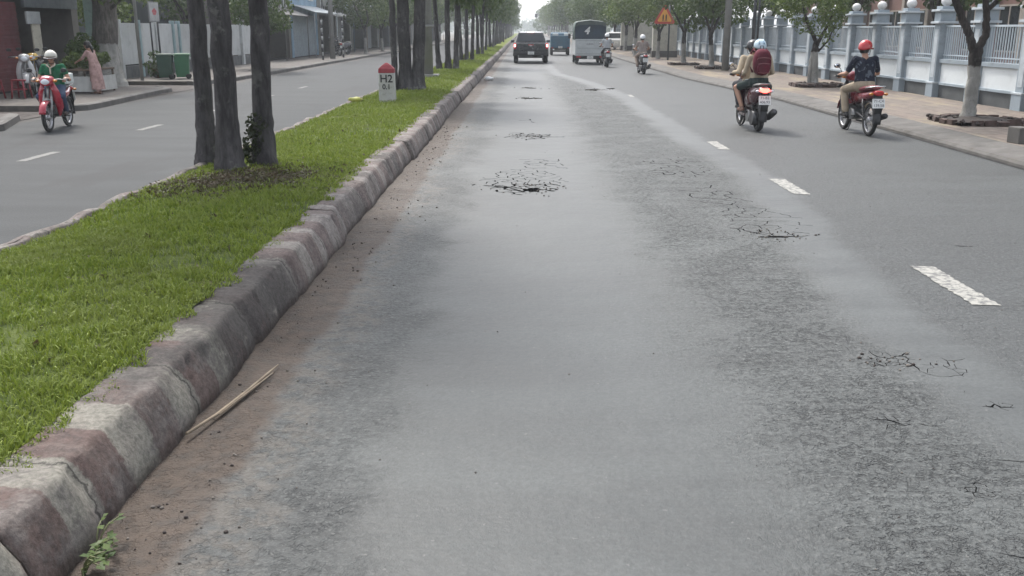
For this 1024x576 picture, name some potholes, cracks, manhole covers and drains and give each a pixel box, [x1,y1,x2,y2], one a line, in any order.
crack [870,416,932,429]
crack [961,482,995,498]
crack [868,351,967,377]
crack [983,401,1013,411]
crack [643,159,811,238]
